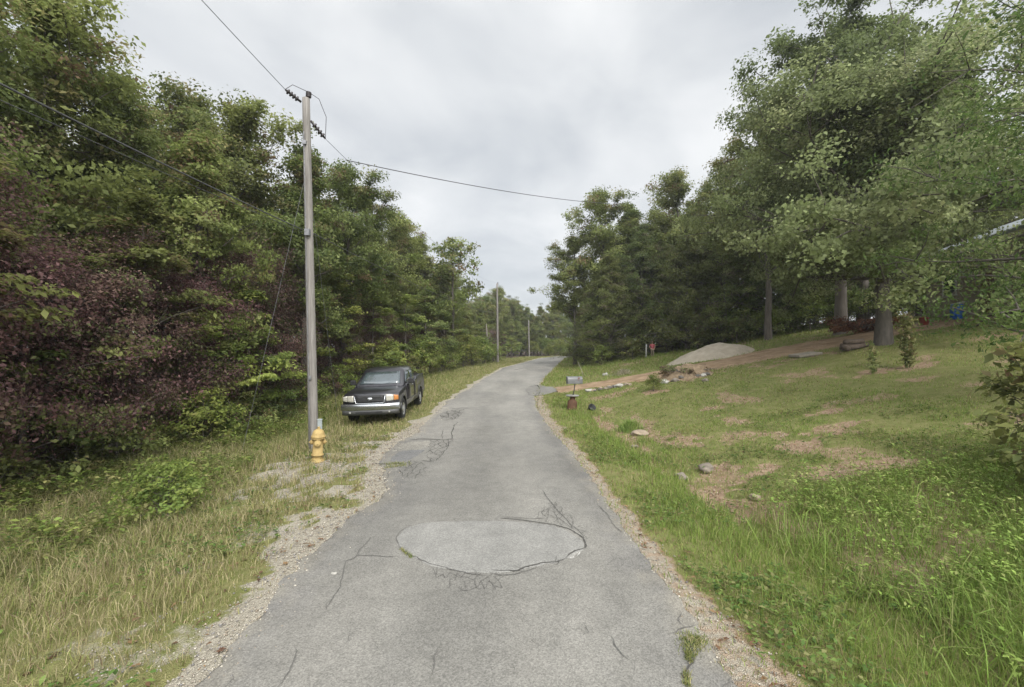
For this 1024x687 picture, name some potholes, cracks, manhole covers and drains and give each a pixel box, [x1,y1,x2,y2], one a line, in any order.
crack [325,491,587,610]
crack [373,408,464,484]
